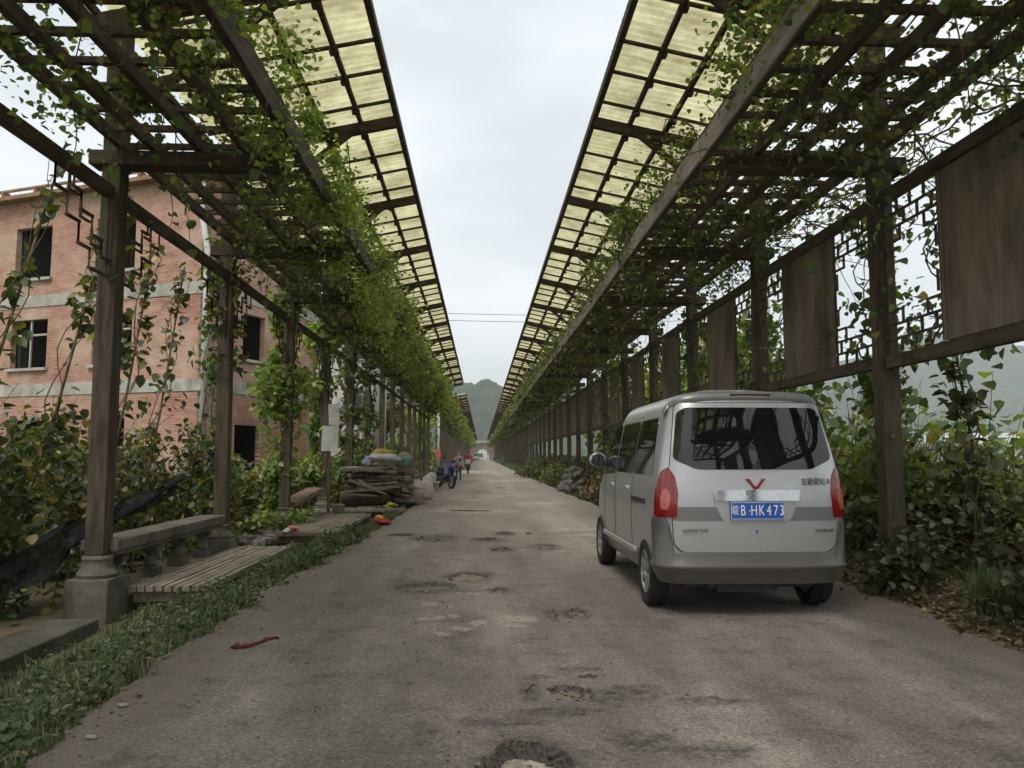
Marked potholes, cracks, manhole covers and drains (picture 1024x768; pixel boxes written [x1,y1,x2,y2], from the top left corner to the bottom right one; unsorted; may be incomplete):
pothole [446,572,490,582]
pothole [547,683,595,701]
pothole [474,740,575,768]
pothole [391,581,458,592]
pothole [562,607,592,620]
